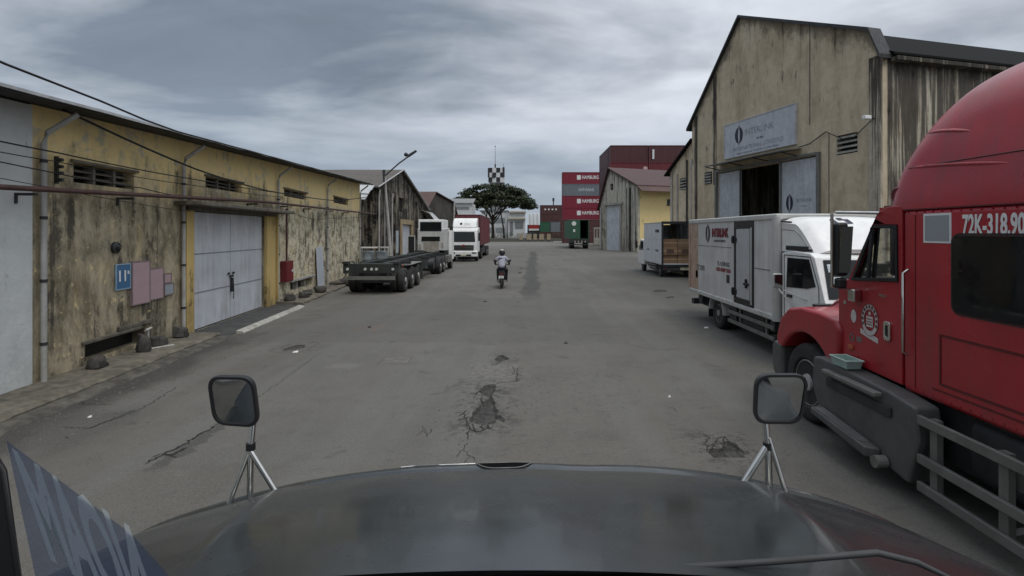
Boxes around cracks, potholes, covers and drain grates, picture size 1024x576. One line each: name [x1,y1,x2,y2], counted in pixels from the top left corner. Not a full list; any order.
pothole [469,384,505,425]
crack [702,433,748,453]
crack [65,387,176,438]
crack [458,362,522,463]
crack [145,354,319,464]
pothole [709,441,746,458]
